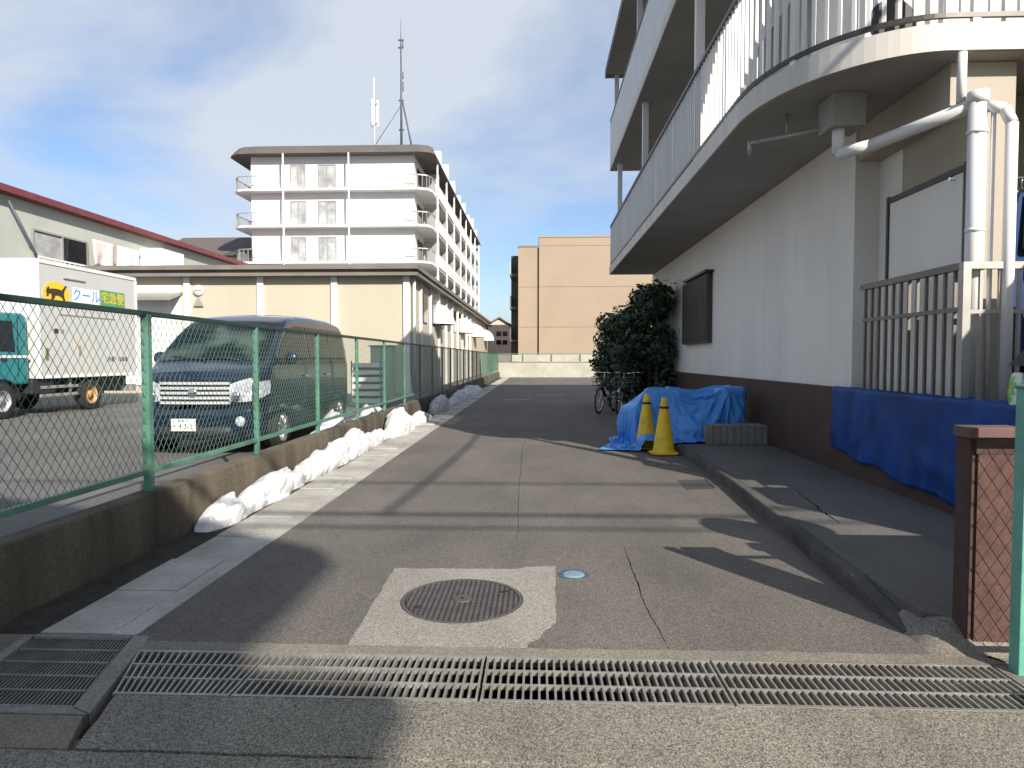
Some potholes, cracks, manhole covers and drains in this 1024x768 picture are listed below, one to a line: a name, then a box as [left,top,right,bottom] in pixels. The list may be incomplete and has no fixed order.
drain grate [711,659,1024,712]
drain grate [231,652,485,701]
crack [623,545,669,649]
manhole cover [401,579,523,623]
drain grate [0,634,150,739]
crack [797,491,840,524]
drain grate [112,650,268,699]
drain grate [480,656,735,706]
